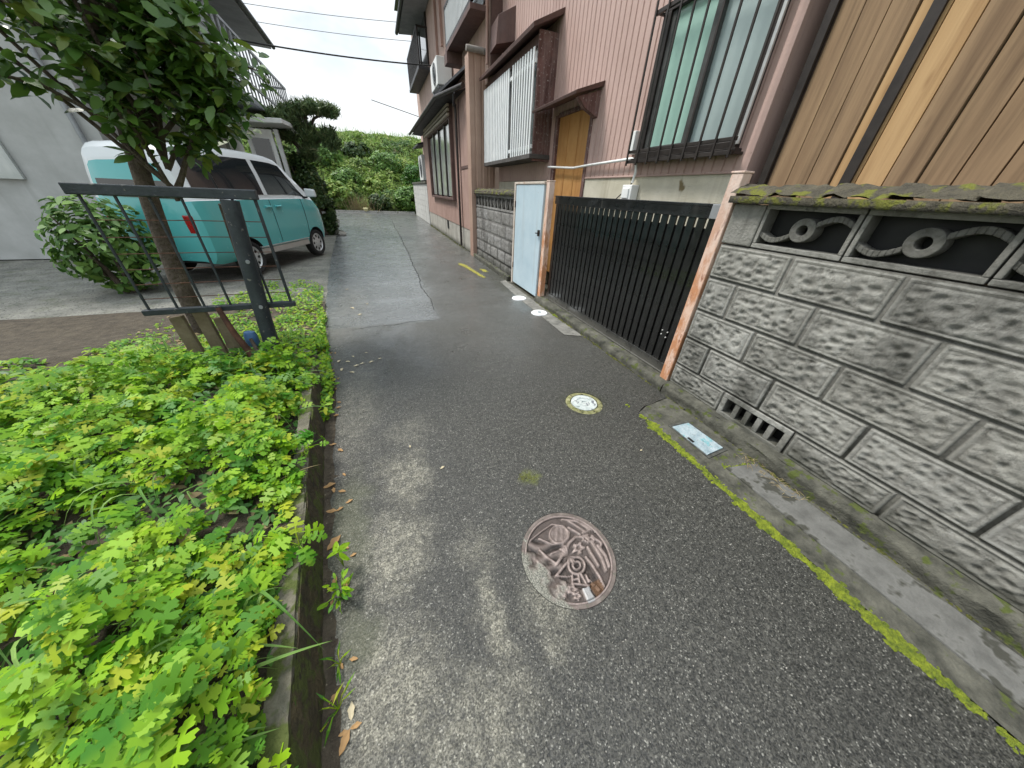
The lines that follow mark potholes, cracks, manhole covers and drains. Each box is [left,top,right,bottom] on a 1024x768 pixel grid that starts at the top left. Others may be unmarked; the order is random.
manhole cover [668,421,728,459]
manhole cover [565,393,603,414]
crack [353,217,434,330]
manhole cover [522,513,616,610]
